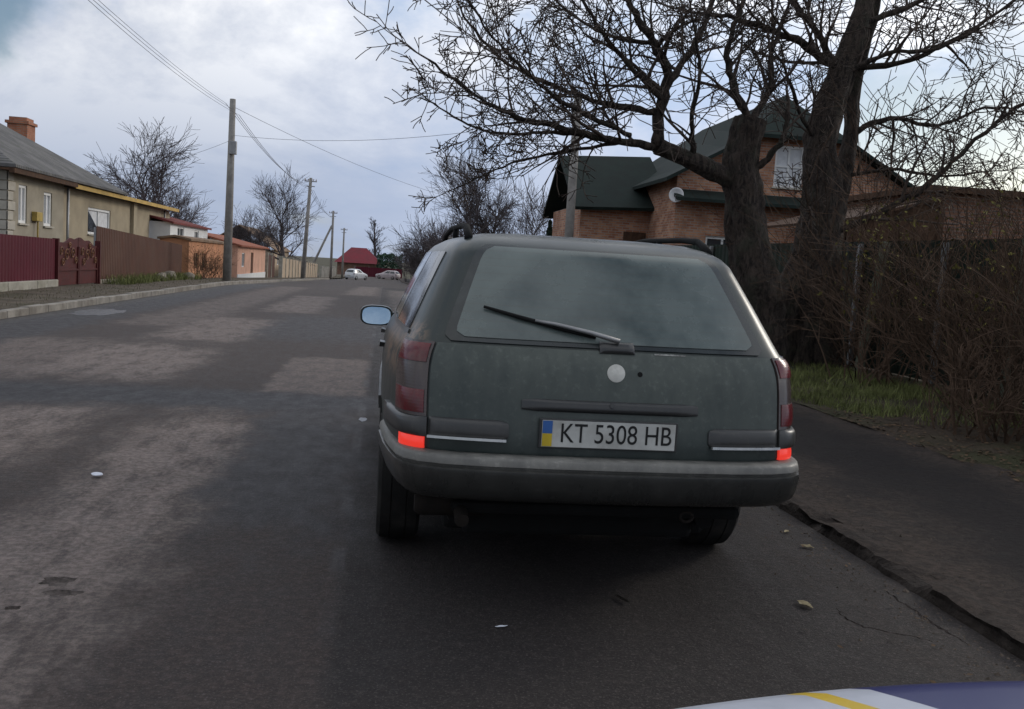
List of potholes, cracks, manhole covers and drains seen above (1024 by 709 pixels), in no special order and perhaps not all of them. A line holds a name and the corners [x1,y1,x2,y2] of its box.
crack [836,591,967,644]
pothole [38,577,77,586]
